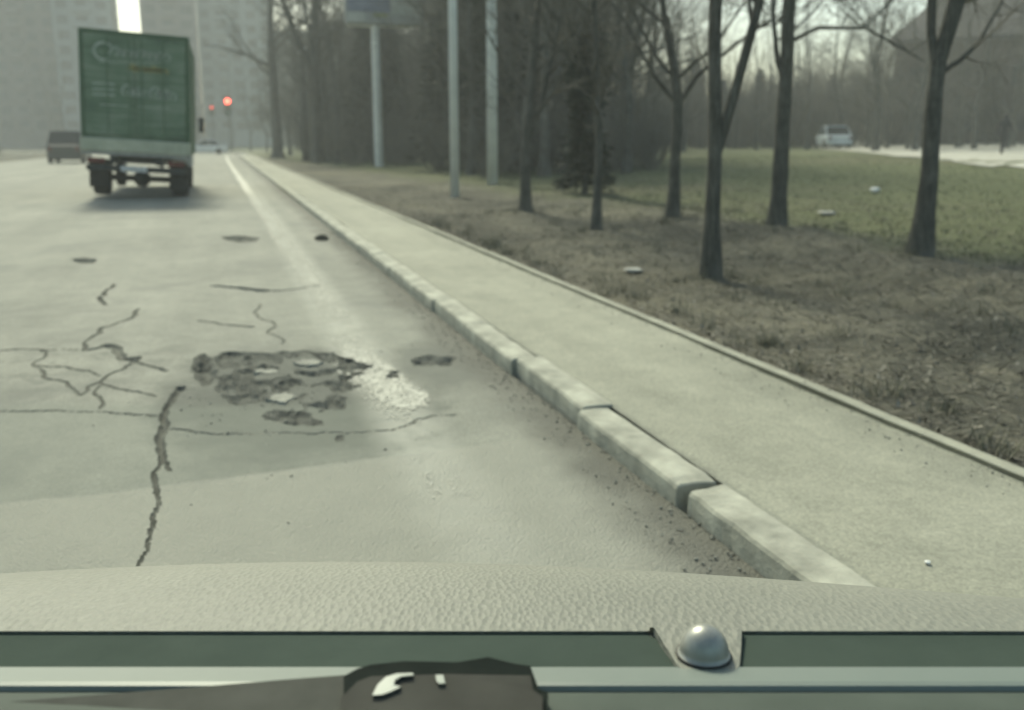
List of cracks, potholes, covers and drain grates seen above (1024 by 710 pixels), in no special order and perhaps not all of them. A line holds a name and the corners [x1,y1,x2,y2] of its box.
pothole [191,353,220,387]
crack [0,284,458,567]
pothole [410,354,457,366]
pothole [213,350,374,427]
